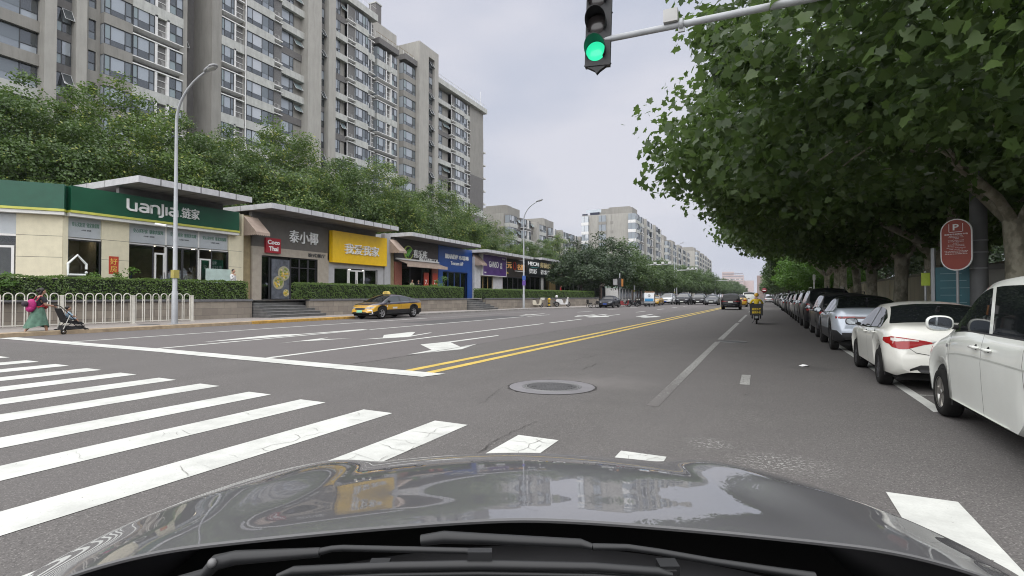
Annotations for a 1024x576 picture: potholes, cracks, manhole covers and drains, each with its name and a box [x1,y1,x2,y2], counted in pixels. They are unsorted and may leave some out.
manhole cover [507,380,597,395]
